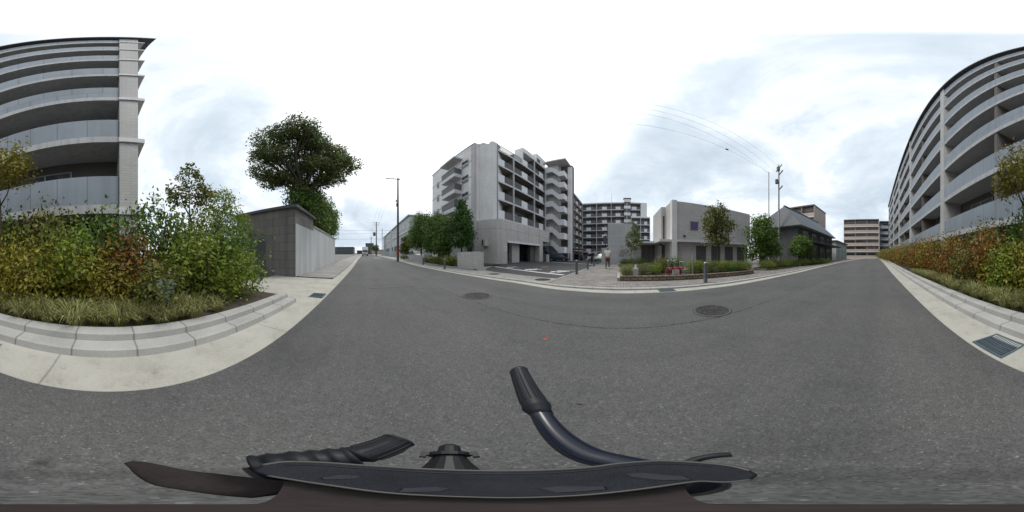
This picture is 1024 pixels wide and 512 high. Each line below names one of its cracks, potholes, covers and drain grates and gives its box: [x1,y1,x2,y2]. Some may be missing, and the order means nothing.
manhole cover [462,292,492,300]
manhole cover [693,305,732,317]
